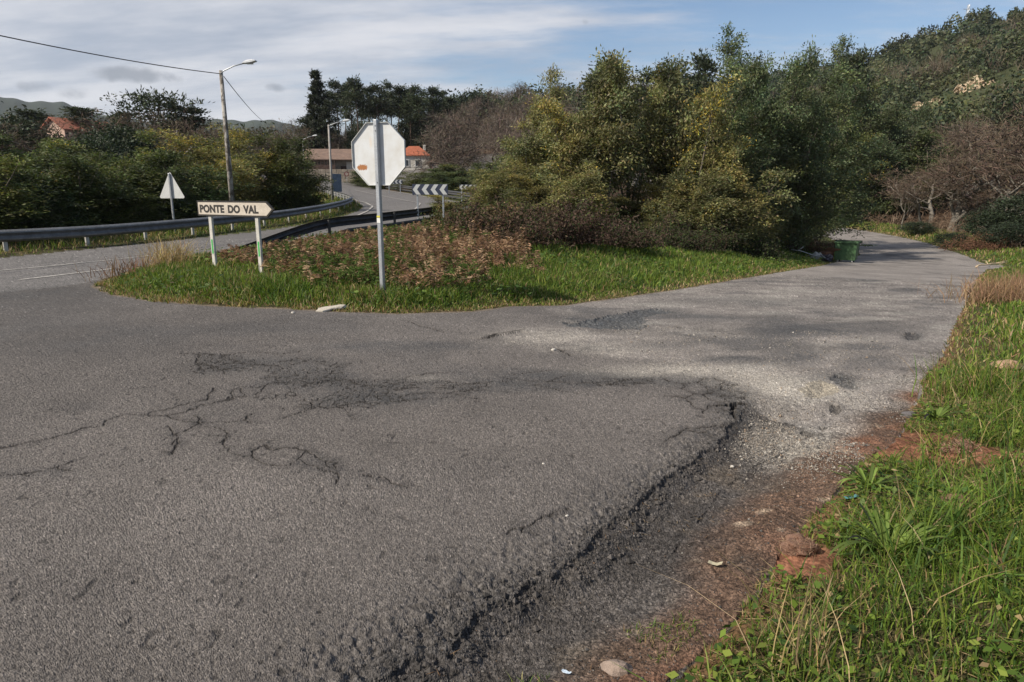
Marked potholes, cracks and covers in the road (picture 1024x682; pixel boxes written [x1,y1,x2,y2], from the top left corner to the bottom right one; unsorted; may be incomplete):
crack [363,473,408,489]
crack [0,351,493,485]
pothole [828,404,843,416]
pothole [901,332,922,341]
crack [507,507,570,535]
crack [502,370,749,442]
pothole [827,373,860,390]
